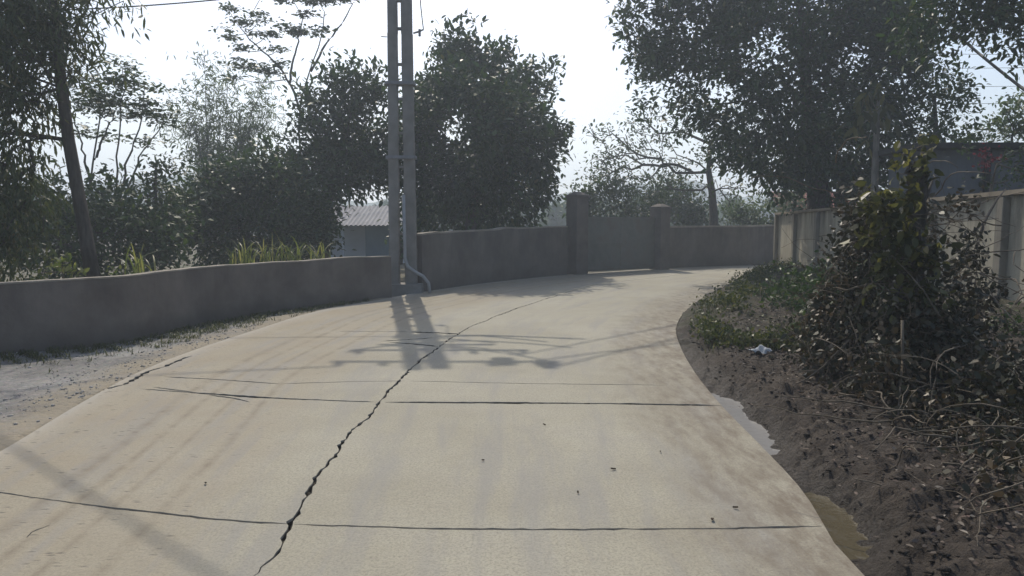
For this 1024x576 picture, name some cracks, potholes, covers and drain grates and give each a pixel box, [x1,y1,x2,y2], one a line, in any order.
crack [109,358,185,389]
crack [127,300,744,558]
